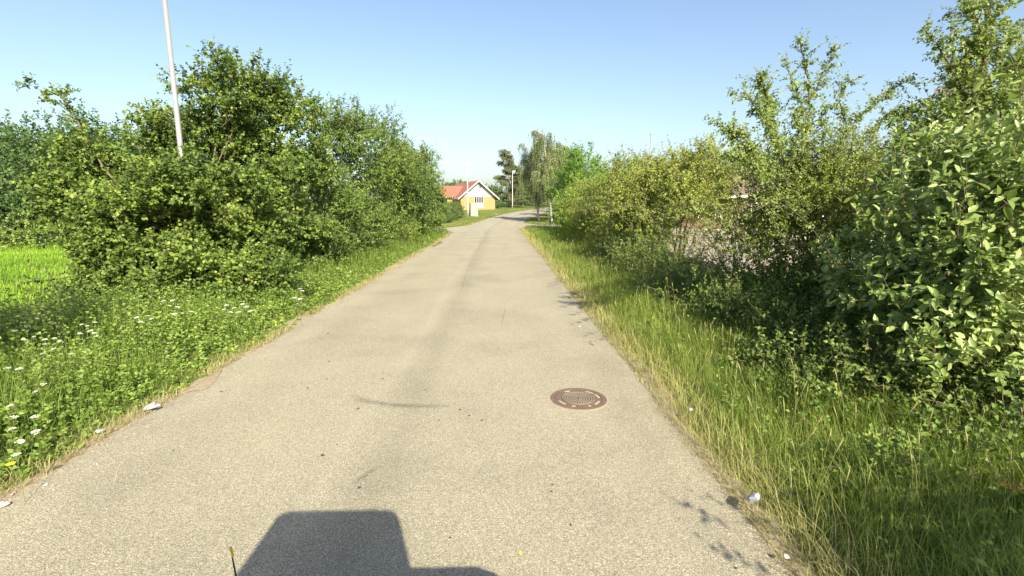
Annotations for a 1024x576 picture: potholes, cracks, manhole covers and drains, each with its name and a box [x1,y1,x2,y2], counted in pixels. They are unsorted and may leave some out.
manhole cover [548,387,609,411]
